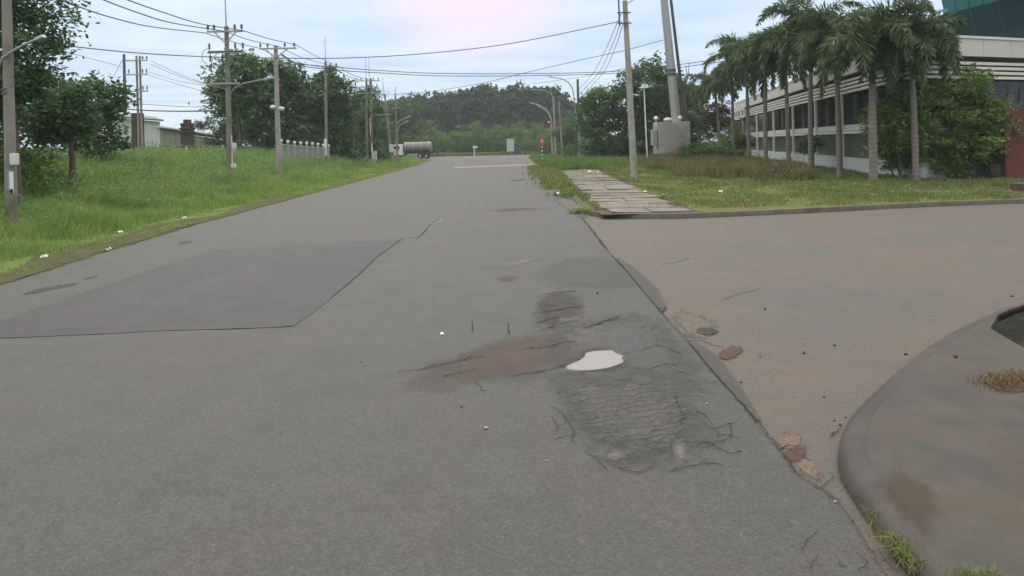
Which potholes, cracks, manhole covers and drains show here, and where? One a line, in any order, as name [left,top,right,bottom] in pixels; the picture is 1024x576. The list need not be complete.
pothole [696,327,718,335]
pothole [564,347,627,371]
crack [551,217,841,501]
pothole [783,446,806,462]
pothole [719,345,743,359]
